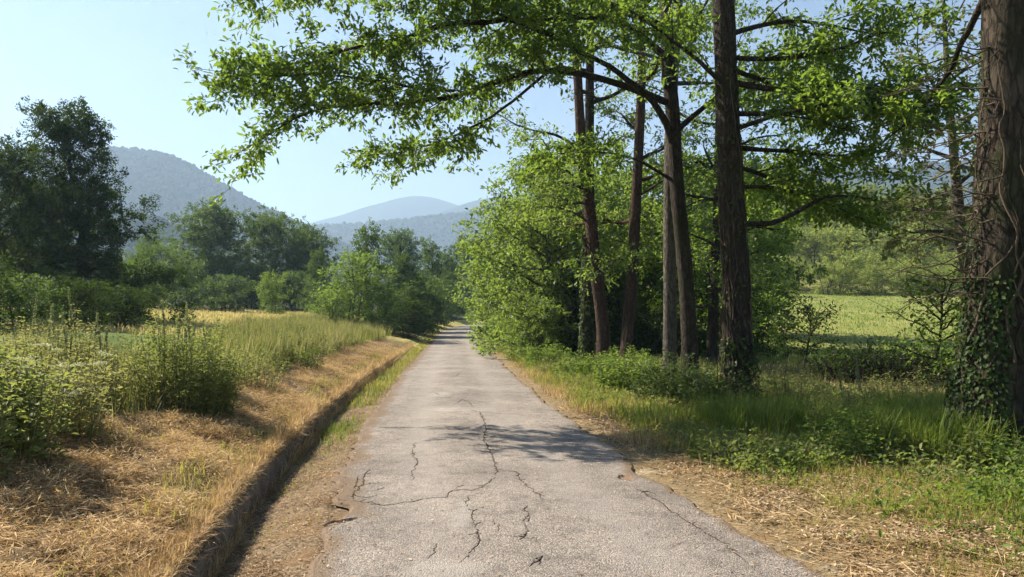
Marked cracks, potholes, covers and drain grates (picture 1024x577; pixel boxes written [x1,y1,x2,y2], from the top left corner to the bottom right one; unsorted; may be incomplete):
crack [351,393,544,567]
crack [637,489,745,561]
